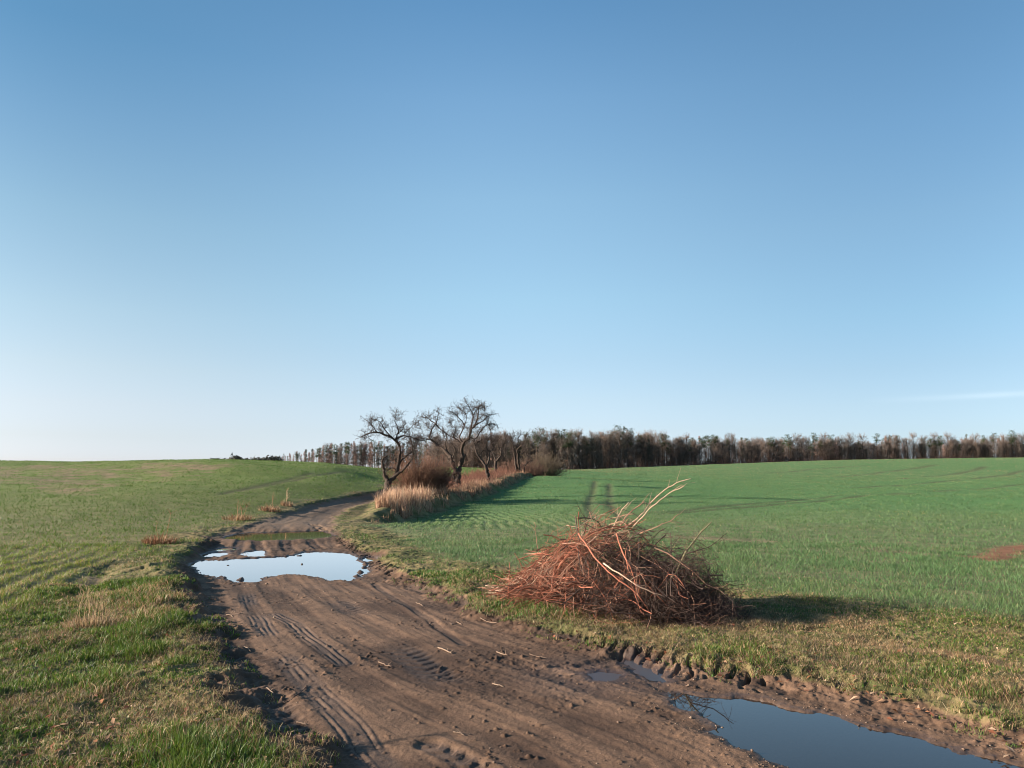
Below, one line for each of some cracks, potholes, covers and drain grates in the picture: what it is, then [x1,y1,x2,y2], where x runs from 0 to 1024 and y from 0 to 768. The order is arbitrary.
pothole [185,550,376,583]
